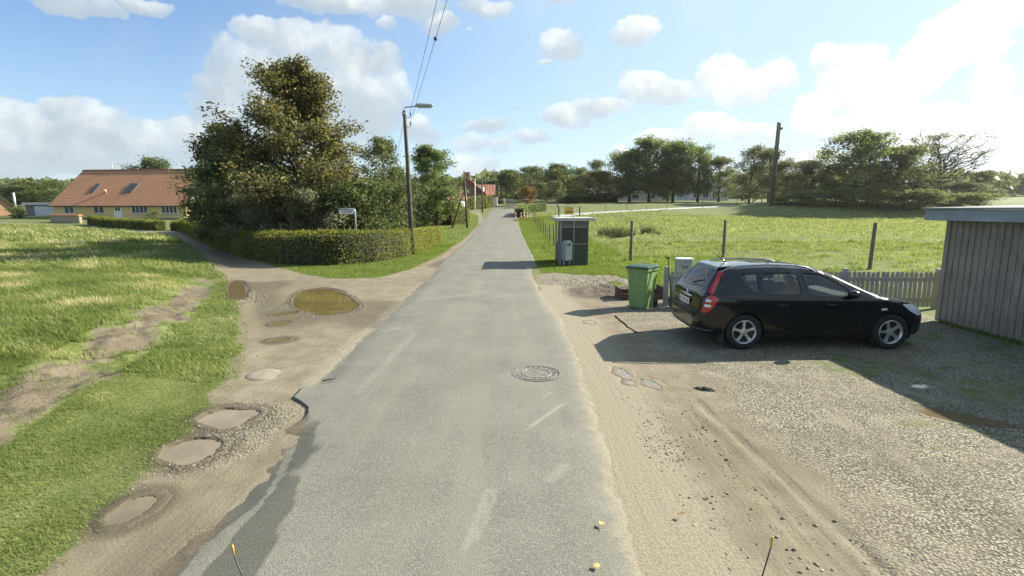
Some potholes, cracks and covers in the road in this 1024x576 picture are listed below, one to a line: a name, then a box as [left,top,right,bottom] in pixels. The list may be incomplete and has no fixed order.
pothole [187,404,269,433]
pothole [620,378,643,387]
pothole [898,402,1024,432]
pothole [640,377,669,391]
pothole [225,280,249,300]
pothole [146,432,233,471]
pothole [88,488,173,534]
pothole [611,366,637,381]
manhole cover [512,365,562,382]
pothole [288,288,361,316]
